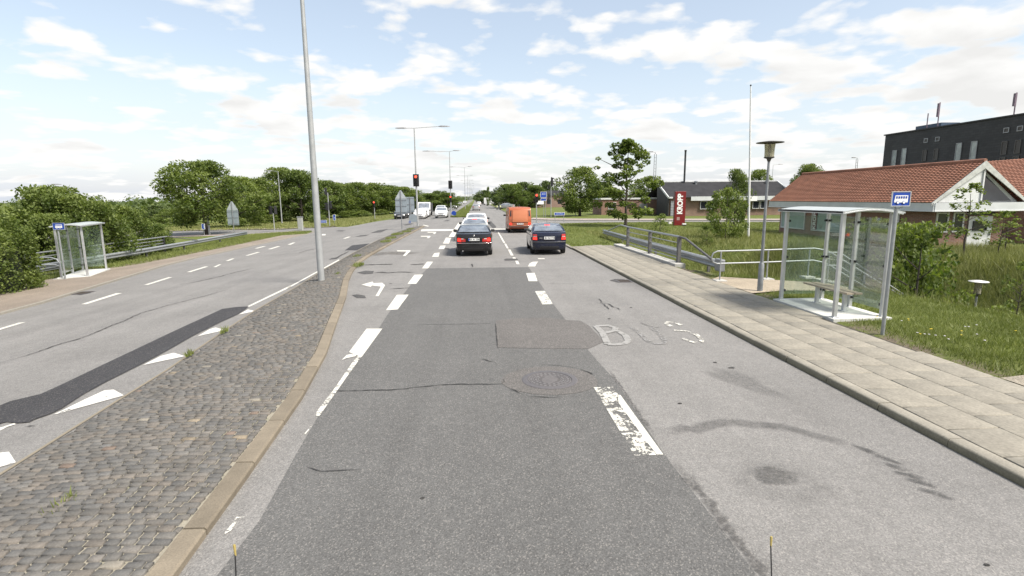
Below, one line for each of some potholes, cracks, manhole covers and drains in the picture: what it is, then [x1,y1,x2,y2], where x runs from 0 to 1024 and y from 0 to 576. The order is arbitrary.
manhole cover [522,371,578,389]
crack [336,381,559,397]
